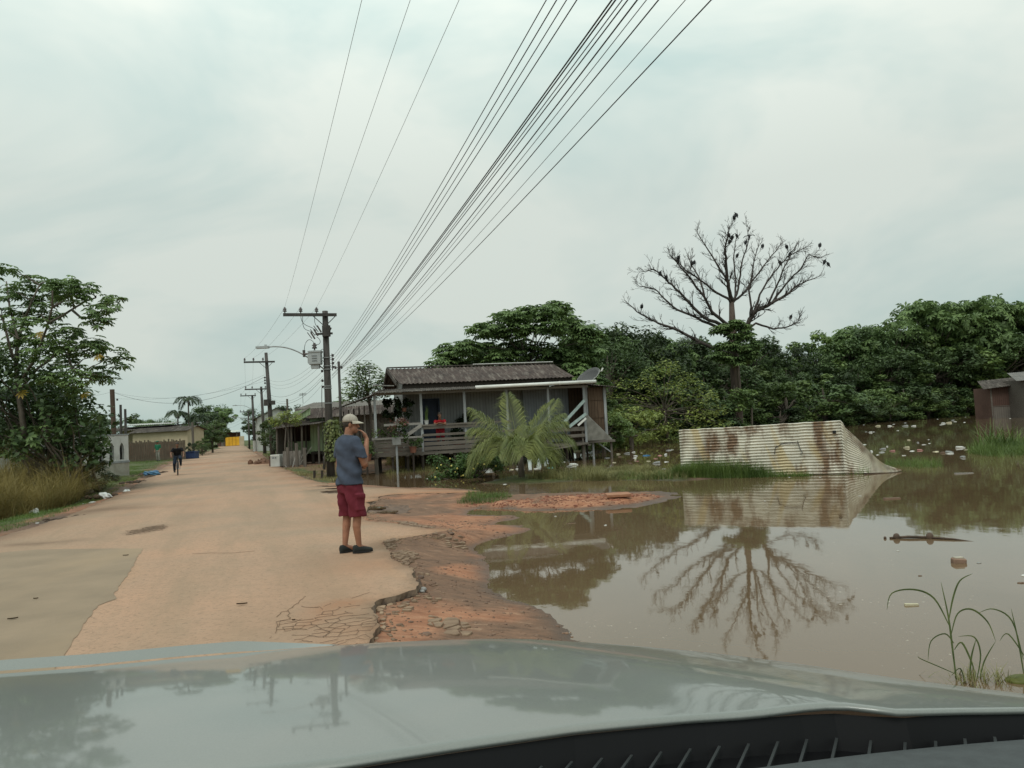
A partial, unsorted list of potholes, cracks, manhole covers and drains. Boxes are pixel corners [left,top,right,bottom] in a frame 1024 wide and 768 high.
pothole [368,504,412,514]
crack [270,594,402,645]
